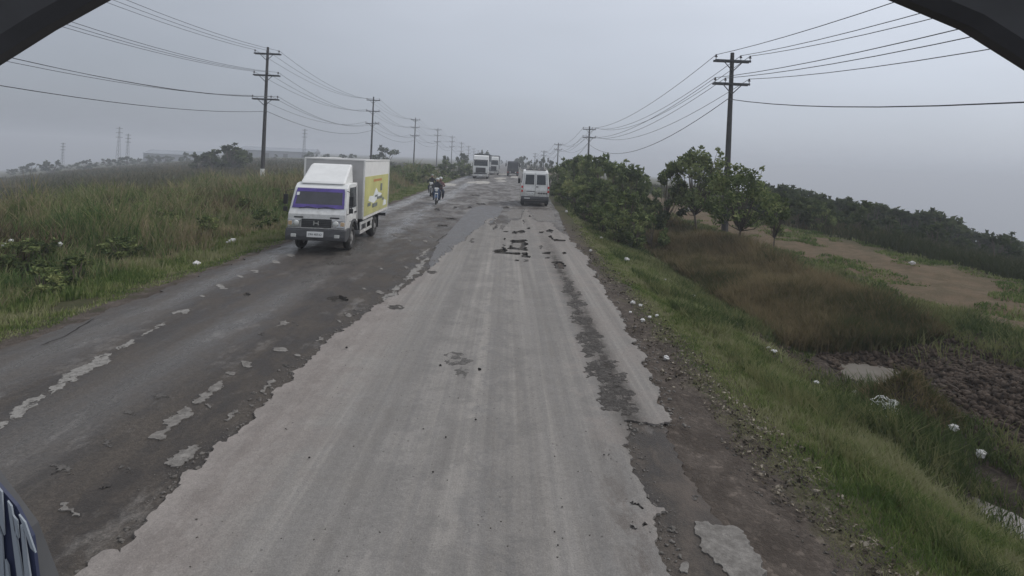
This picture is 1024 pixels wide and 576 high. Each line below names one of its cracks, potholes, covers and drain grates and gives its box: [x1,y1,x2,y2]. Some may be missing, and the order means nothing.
pothole [575,327,604,344]
pothole [327,295,348,303]
pothole [580,340,605,353]
pothole [571,317,593,325]
pothole [596,385,636,412]
pothole [584,360,618,378]
pothole [444,352,473,365]
pothole [597,372,628,391]
